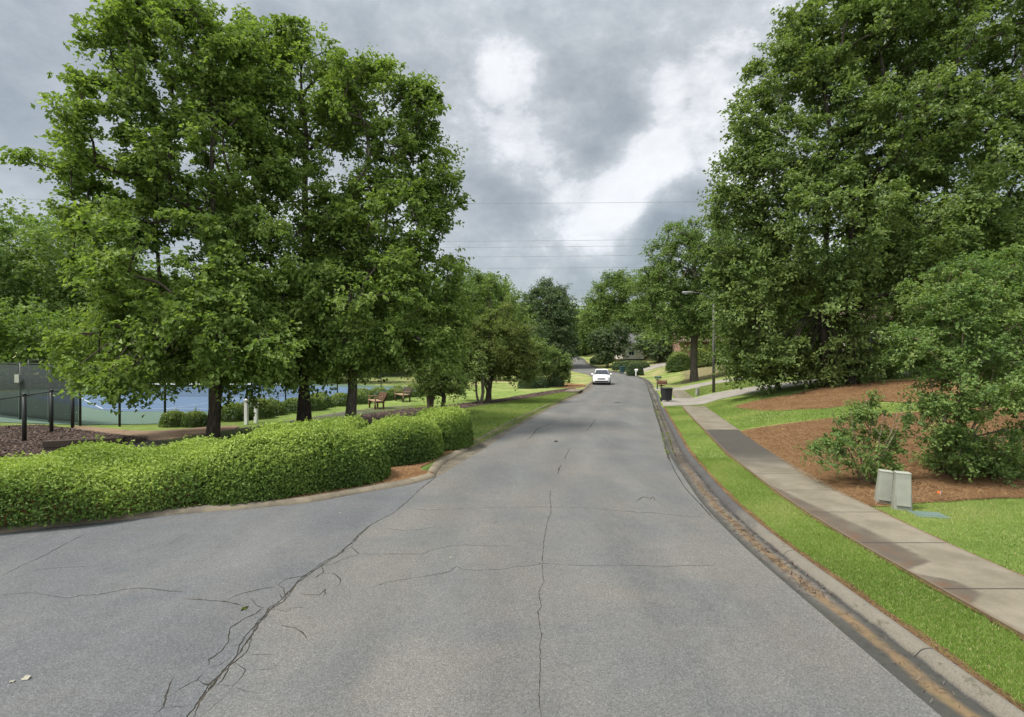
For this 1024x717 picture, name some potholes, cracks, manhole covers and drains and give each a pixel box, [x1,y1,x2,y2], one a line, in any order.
crack [4,477,704,717]
